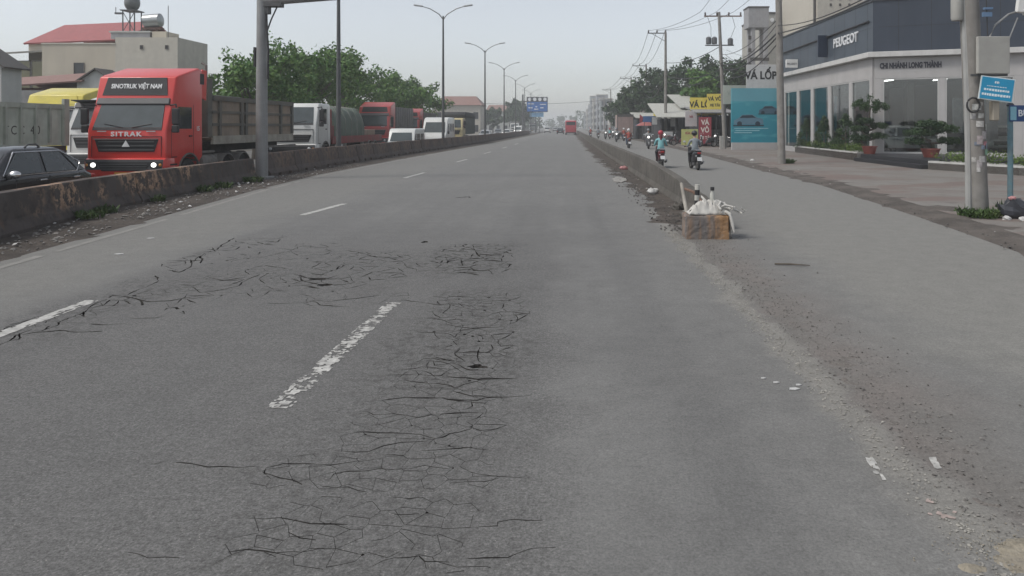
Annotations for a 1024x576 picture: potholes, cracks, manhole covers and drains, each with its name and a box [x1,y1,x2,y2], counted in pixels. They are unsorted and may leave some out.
crack [0,236,421,345]
crack [430,244,513,275]
crack [156,292,530,497]
crack [224,496,556,573]
